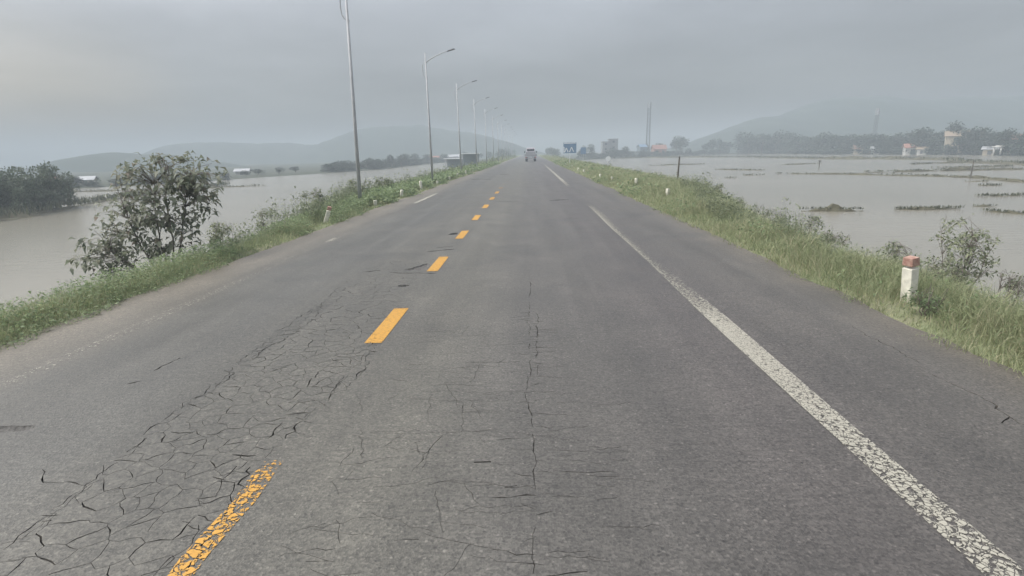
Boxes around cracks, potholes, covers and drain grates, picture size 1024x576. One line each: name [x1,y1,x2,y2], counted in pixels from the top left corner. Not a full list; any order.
crack [278,285,659,576]
crack [0,259,434,576]
crack [852,326,1024,425]
